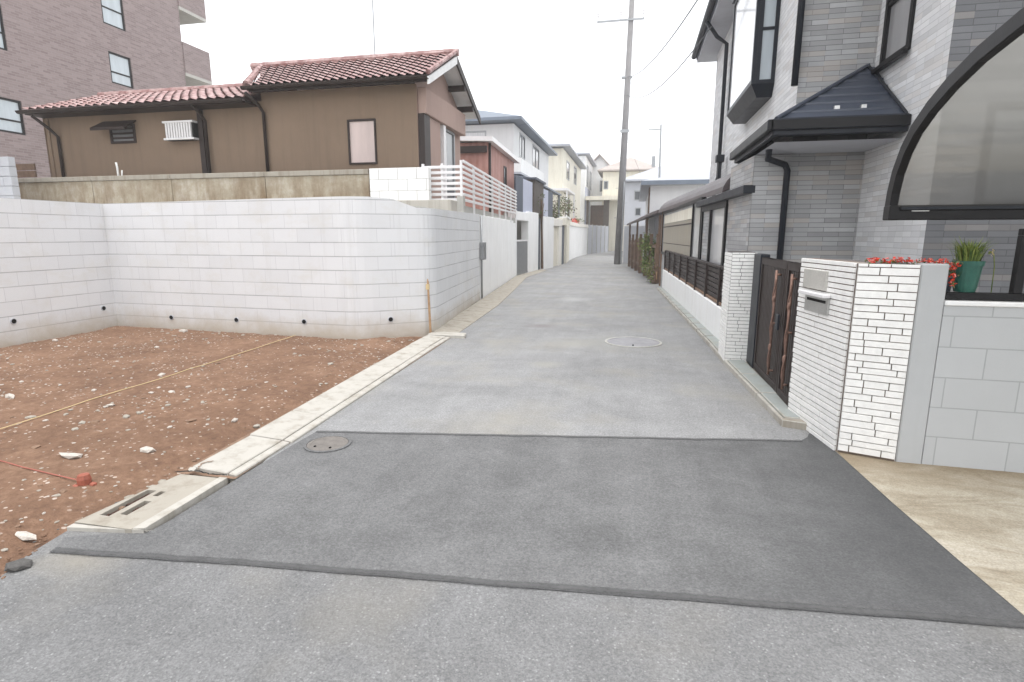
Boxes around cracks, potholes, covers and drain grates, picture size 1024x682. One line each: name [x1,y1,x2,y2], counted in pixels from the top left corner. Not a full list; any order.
manhole cover [303,435,352,453]
manhole cover [605,337,662,348]
